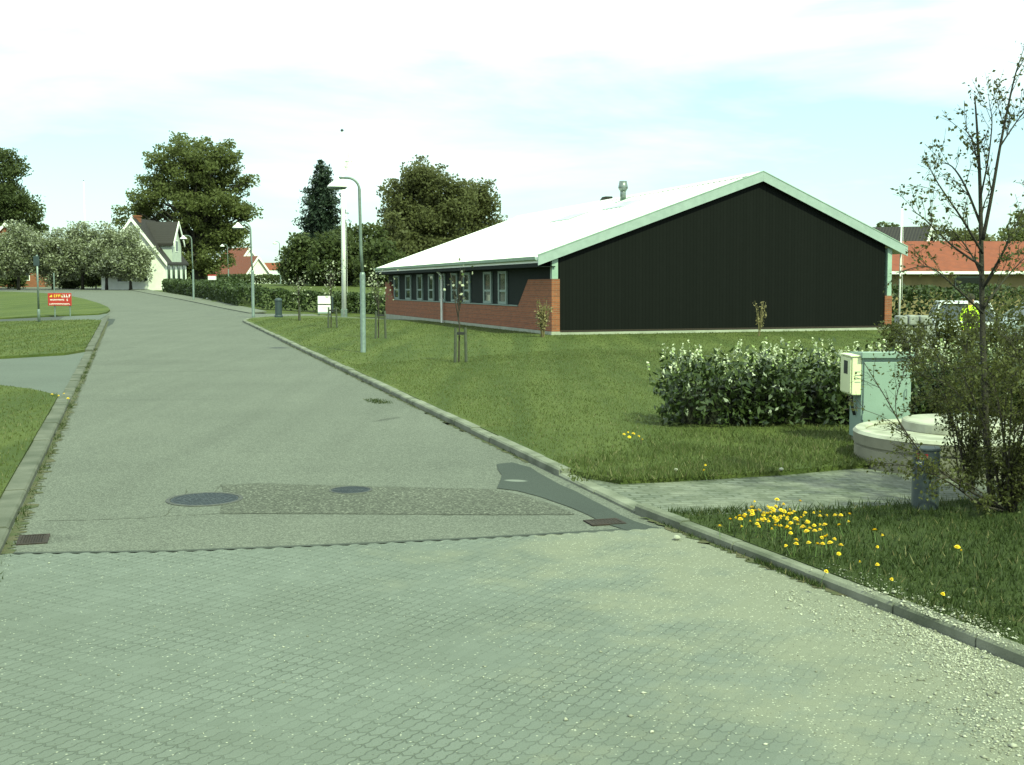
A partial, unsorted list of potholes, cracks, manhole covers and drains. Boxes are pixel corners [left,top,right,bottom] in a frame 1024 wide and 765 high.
manhole cover [165,492,243,507]
manhole cover [329,486,373,494]
drain grate [16,533,50,545]
drain grate [583,518,626,526]
